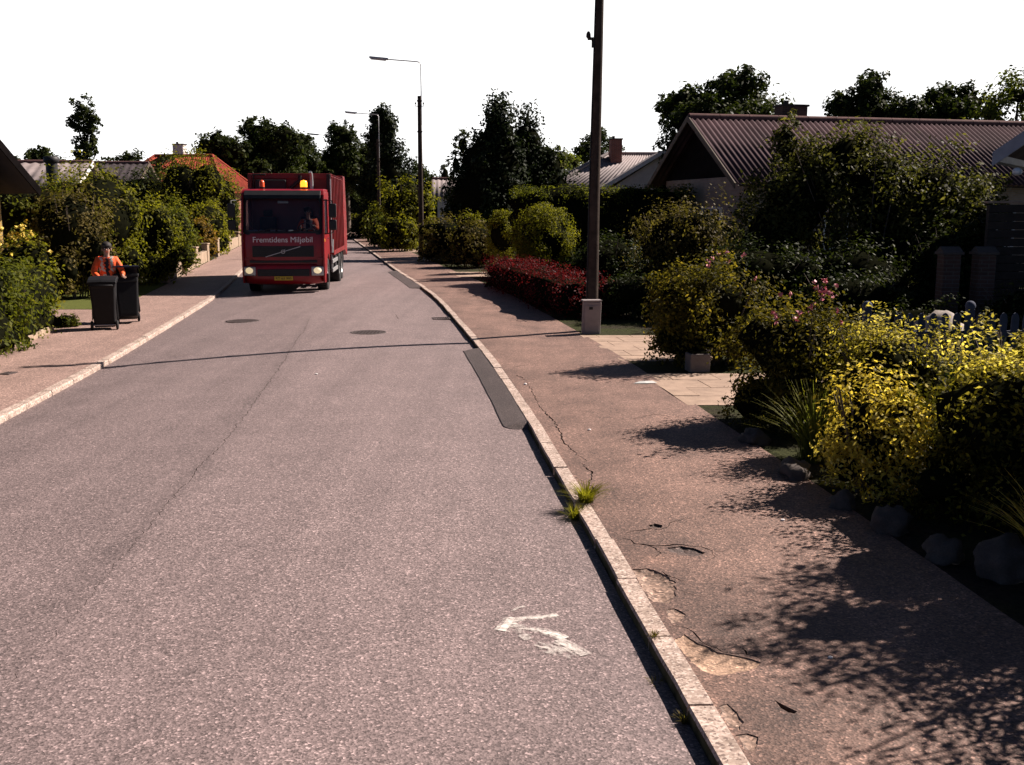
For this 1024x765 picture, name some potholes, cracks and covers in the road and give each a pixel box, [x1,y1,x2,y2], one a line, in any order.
pothole [632,568,677,604]
pothole [666,609,686,623]
crack [516,366,609,495]
crack [624,518,728,597]
pothole [675,634,761,675]
